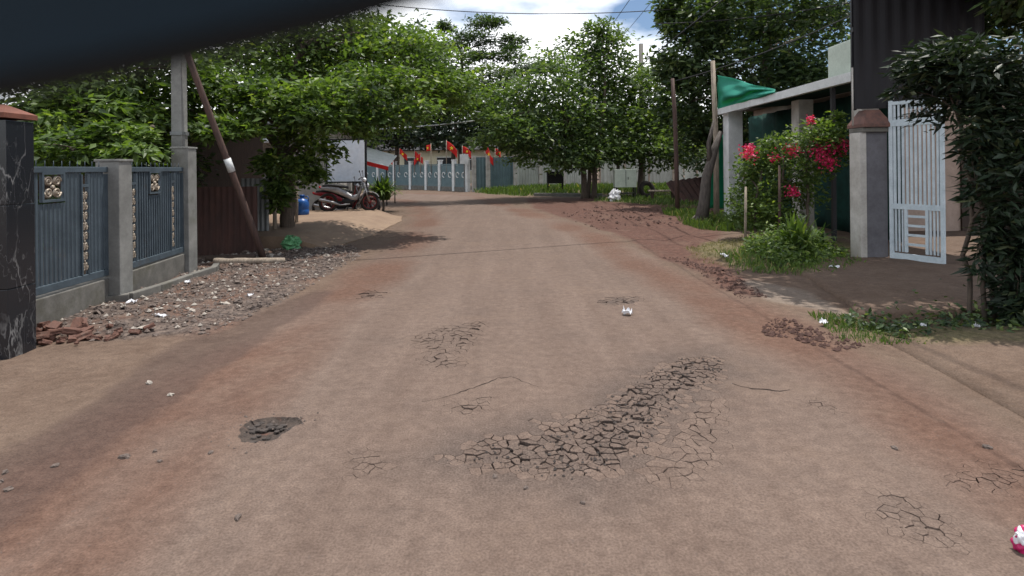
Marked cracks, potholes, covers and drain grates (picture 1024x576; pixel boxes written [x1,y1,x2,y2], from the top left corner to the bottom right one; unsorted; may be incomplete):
pothole [238,417,303,443]
crack [404,321,847,490]
crack [353,289,398,301]
